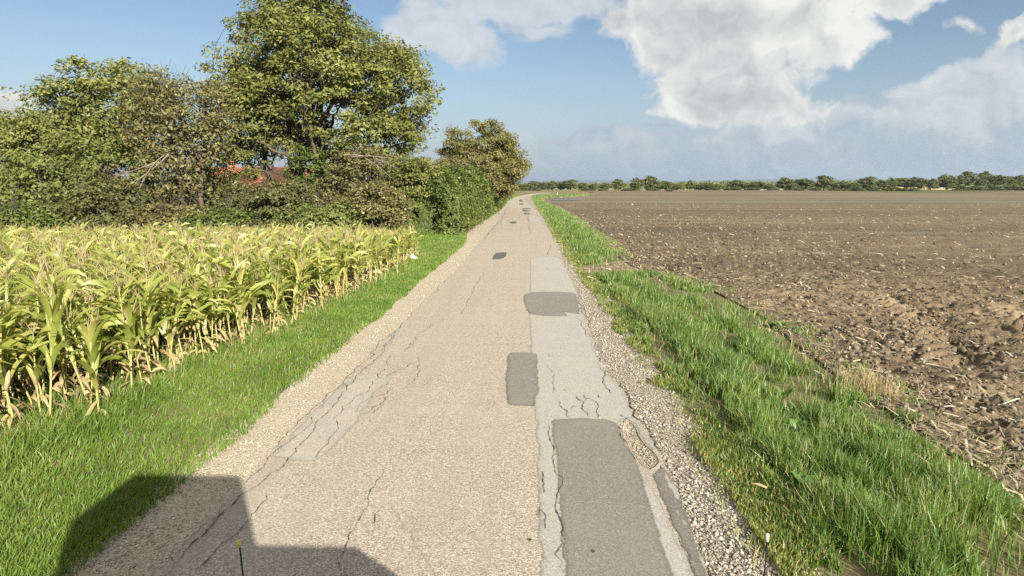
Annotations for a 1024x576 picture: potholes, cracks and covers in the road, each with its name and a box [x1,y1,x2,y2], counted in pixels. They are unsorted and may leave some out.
pothole [622,420,659,469]
crack [170,273,452,572]
crack [547,355,662,452]
